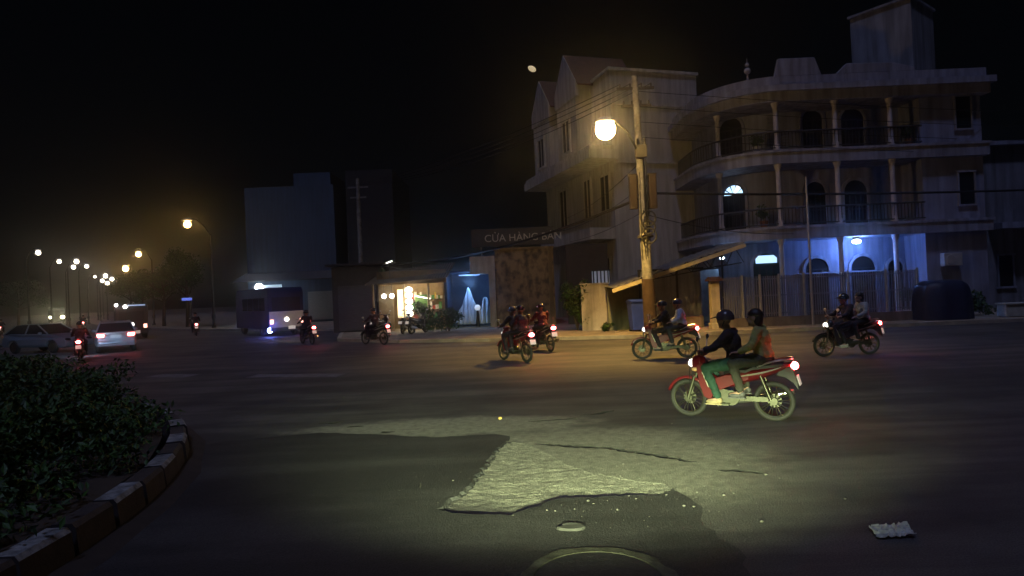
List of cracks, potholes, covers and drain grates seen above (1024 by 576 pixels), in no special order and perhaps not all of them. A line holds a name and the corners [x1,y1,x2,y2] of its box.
manhole cover [521,547,679,576]
crack [538,444,697,462]
